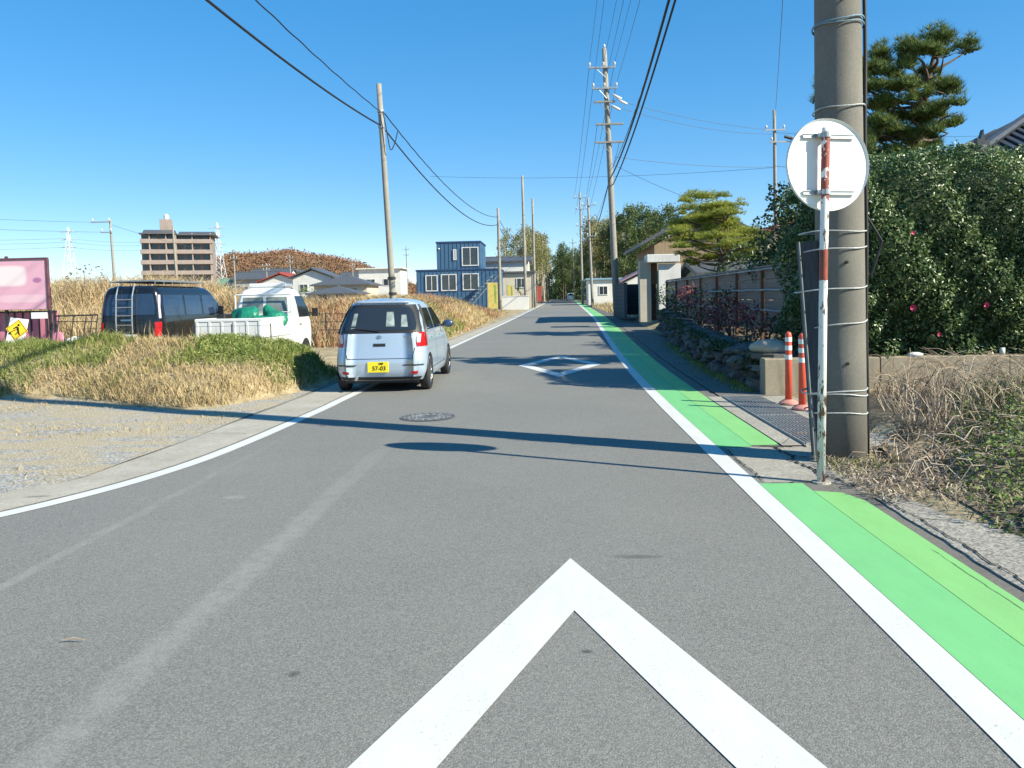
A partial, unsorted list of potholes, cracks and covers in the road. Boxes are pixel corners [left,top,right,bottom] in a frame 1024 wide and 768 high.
manhole cover [400,413,455,421]
drain grate [723,395,811,444]
